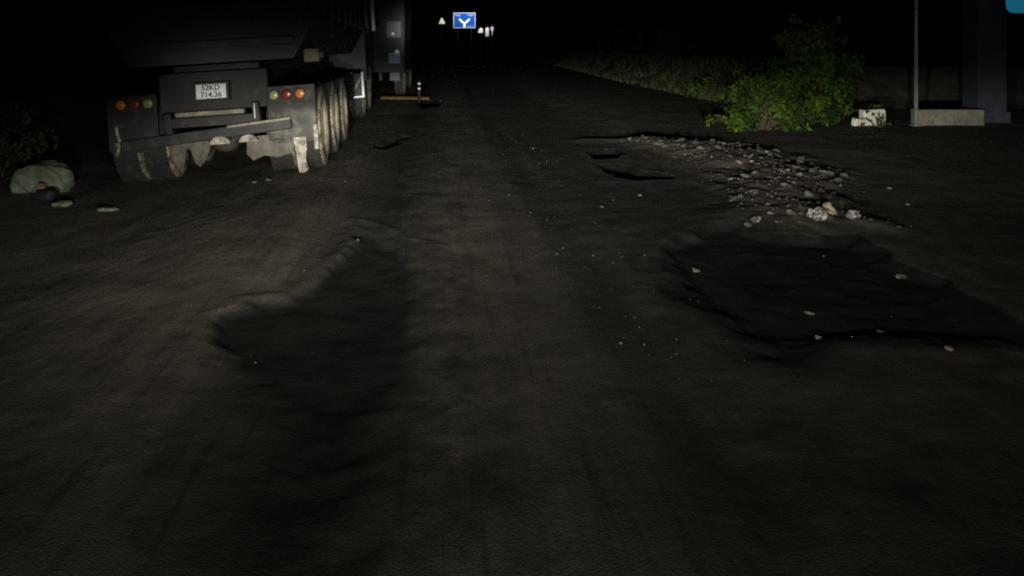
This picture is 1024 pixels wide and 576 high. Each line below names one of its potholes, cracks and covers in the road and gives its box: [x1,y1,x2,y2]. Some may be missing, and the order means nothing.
pothole [597,163,677,181]
pothole [583,148,627,160]
pothole [640,216,1024,376]
pothole [367,134,413,150]
pothole [126,220,460,576]
